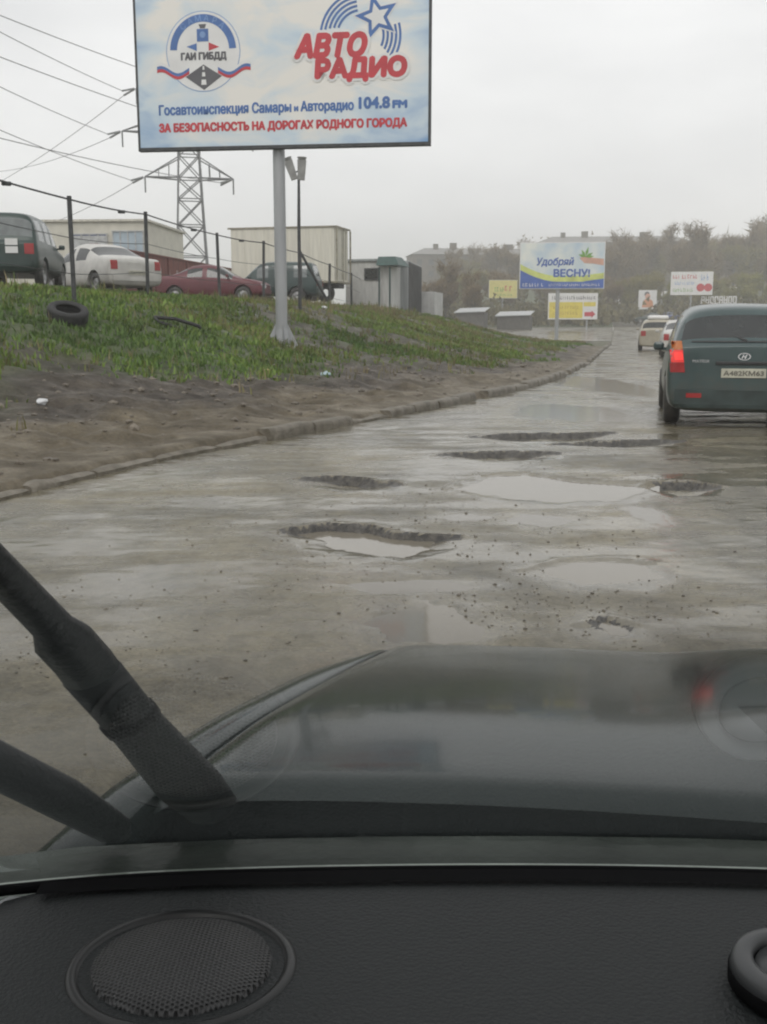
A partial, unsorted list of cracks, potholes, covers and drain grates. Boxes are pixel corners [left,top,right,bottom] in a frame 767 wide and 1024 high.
pothole [269,522,471,563]
pothole [462,431,629,442]
pothole [429,450,567,462]
pothole [569,612,649,643]
pothole [649,479,730,499]
pothole [544,439,694,449]
pothole [291,475,408,493]
